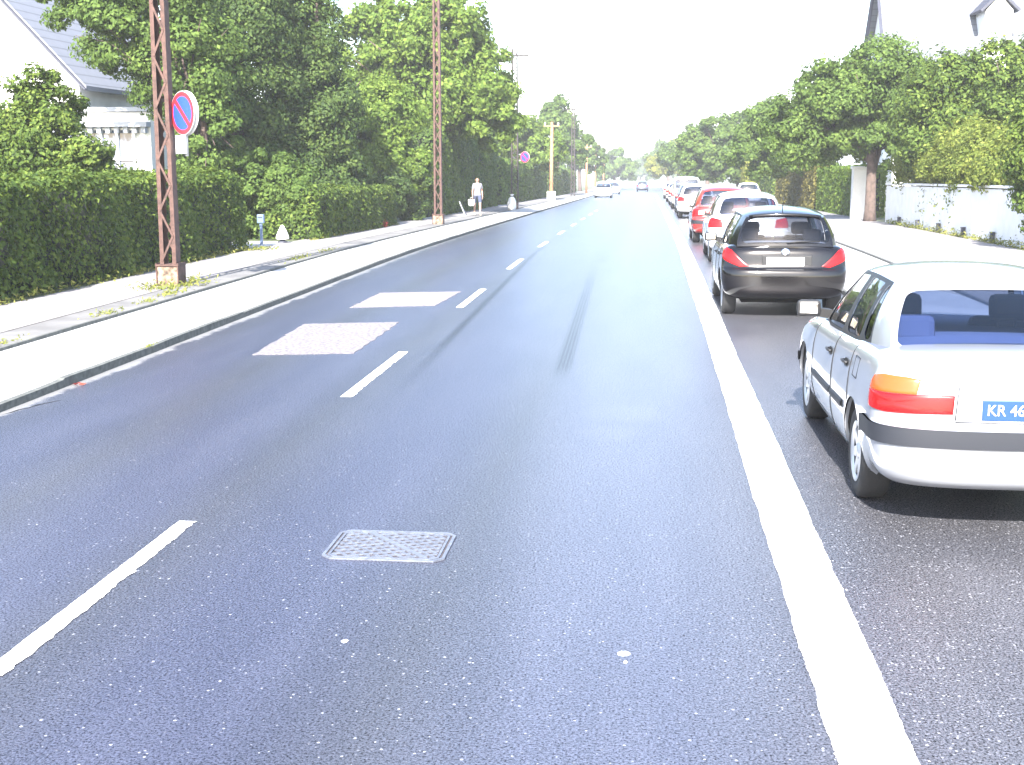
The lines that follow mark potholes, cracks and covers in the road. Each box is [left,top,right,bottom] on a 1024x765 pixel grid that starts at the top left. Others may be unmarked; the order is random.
manhole cover [322,529,456,562]
